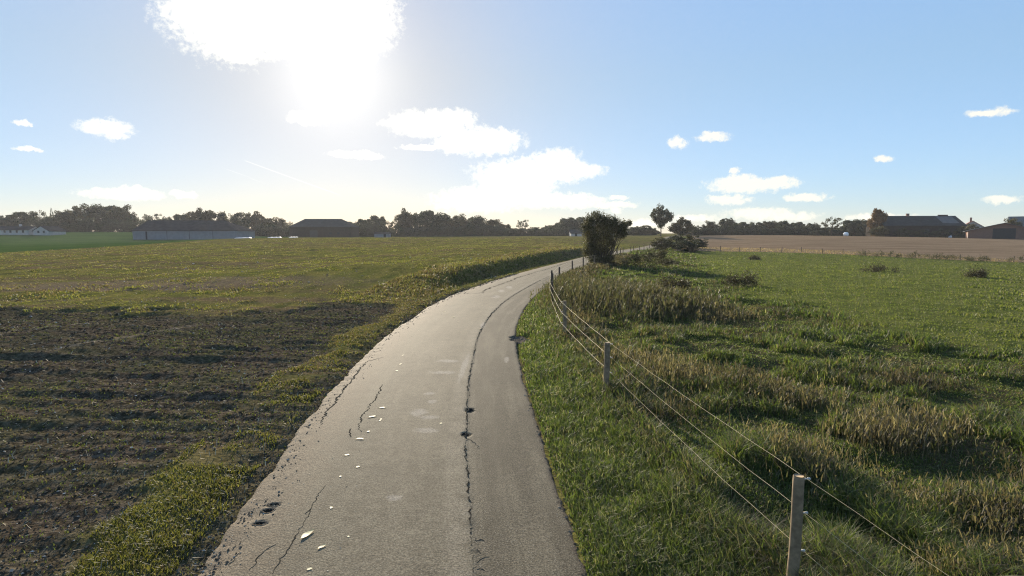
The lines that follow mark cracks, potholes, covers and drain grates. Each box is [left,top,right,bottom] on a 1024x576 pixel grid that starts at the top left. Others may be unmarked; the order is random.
crack [228,486,325,573]
crack [320,357,383,437]
